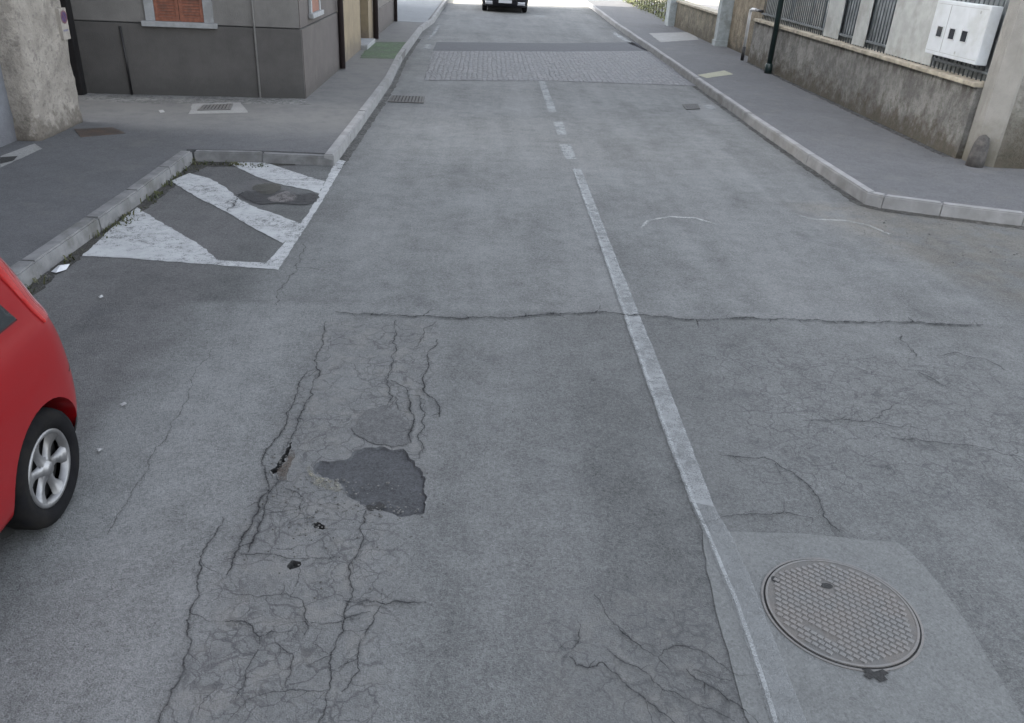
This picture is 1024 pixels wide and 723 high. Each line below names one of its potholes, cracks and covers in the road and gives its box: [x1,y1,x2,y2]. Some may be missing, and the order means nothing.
manhole cover [74,127,125,137]
manhole cover [761,557,924,672]
crack [336,308,978,459]
pothole [270,442,292,474]
crack [717,454,840,532]
drain grate [388,95,425,103]
crack [158,326,440,723]
crack [556,595,763,723]
crack [805,403,1023,458]
